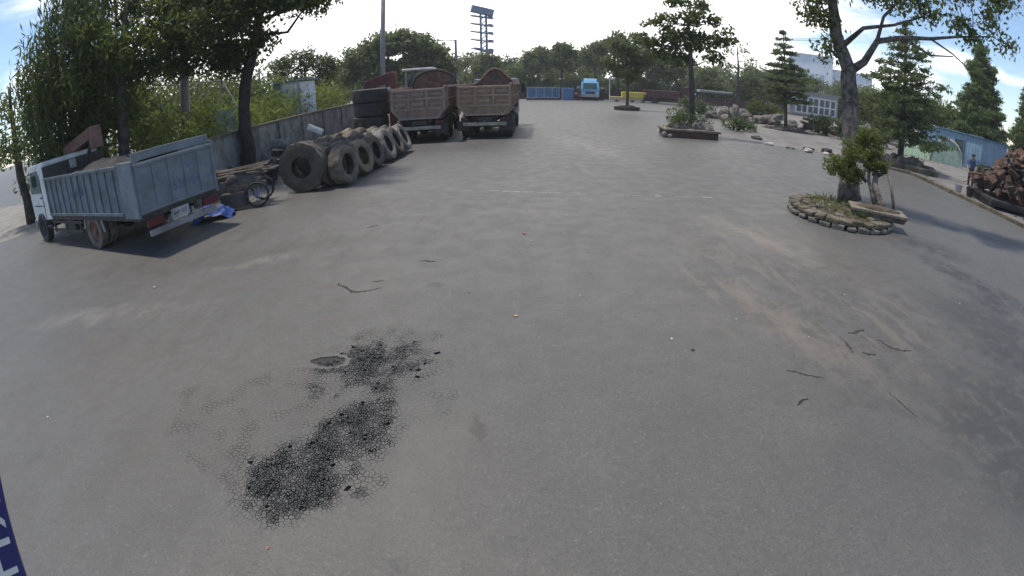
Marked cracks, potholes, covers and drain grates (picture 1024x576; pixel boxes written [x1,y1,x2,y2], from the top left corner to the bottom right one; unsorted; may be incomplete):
pothole [310,356,346,367]
crack [338,280,385,293]
crack [845,330,911,356]
